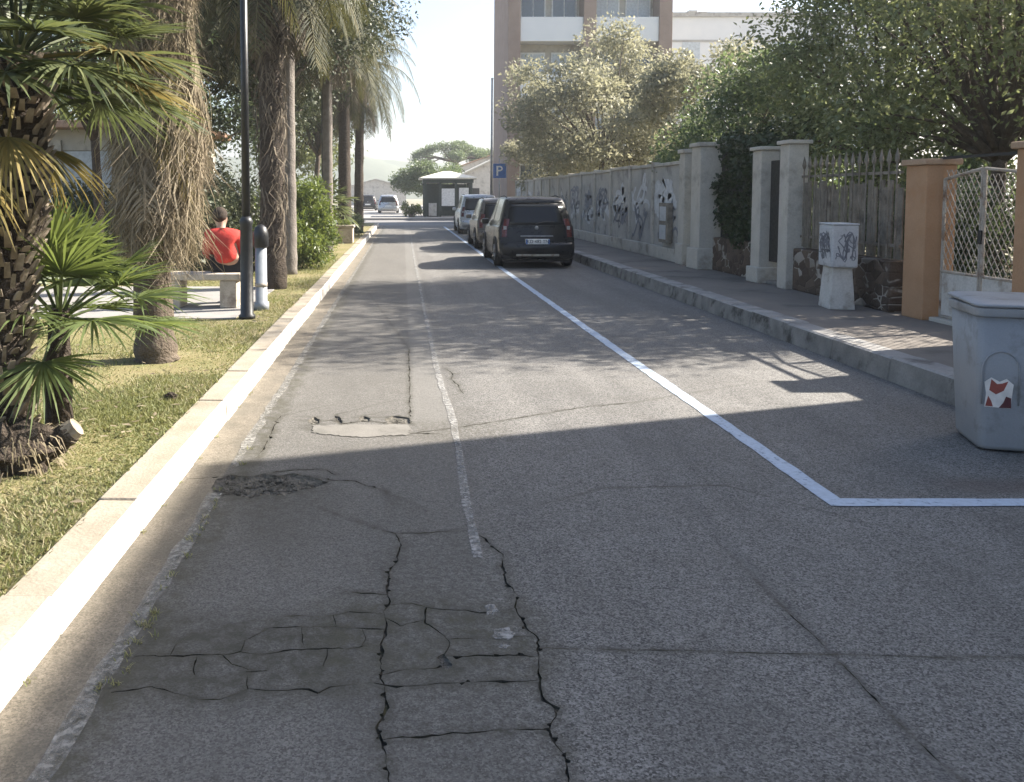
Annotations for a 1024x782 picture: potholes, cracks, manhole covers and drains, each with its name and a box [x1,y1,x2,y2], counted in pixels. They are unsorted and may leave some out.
pothole [211,473,328,499]
crack [111,613,366,700]
